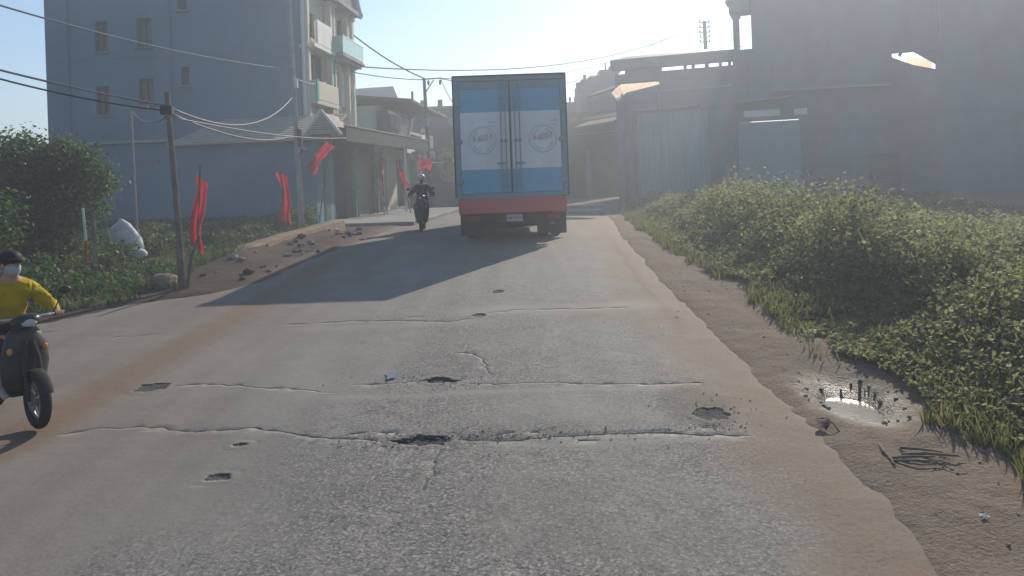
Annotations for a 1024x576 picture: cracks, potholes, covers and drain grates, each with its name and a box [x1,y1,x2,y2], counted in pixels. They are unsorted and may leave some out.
pothole [124,381,179,395]
crack [420,426,749,490]
pothole [191,470,242,486]
crack [454,352,704,386]
crack [176,383,334,393]
crack [288,307,625,325]
pothole [682,405,741,425]
pothole [376,432,462,451]
pothole [411,375,470,386]
crack [56,425,402,450]
